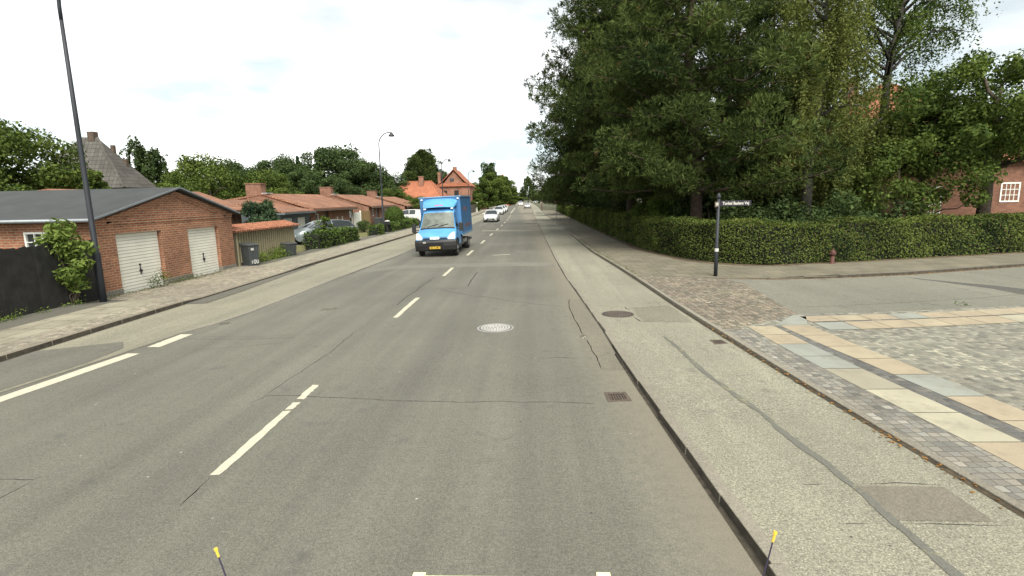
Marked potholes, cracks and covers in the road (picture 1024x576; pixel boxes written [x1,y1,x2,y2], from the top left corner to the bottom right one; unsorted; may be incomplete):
drain grate [604,392,632,402]
crack [396,273,605,368]
manhole cover [477,323,514,332]
